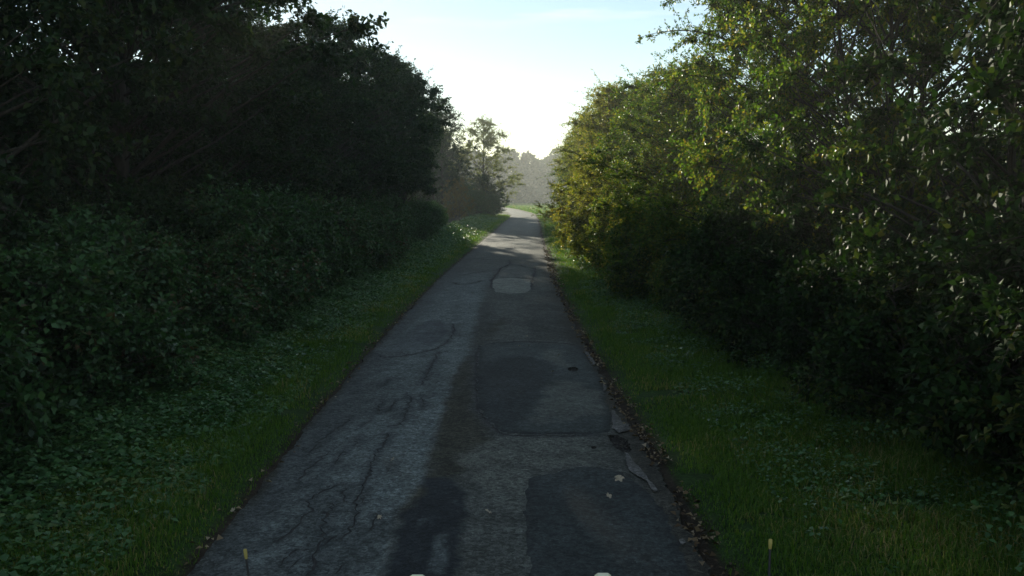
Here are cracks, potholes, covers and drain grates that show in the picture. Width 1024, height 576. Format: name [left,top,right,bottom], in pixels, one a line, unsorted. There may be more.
crack [455,259,535,289]
pothole [607,435,632,452]
crack [271,324,455,576]
